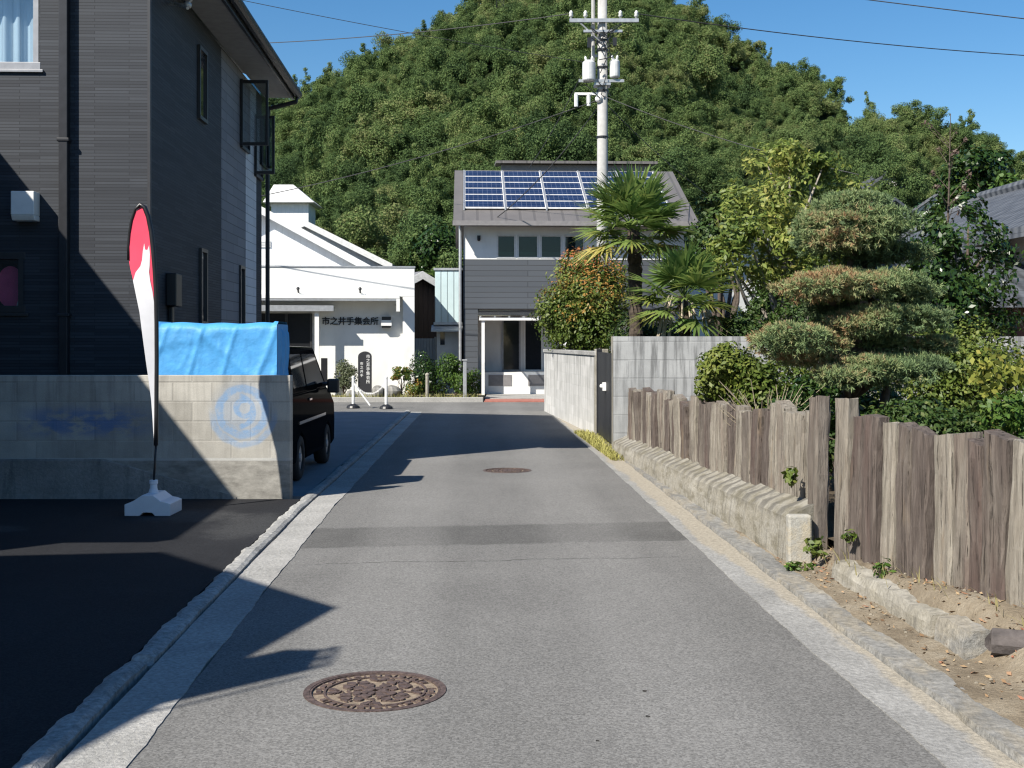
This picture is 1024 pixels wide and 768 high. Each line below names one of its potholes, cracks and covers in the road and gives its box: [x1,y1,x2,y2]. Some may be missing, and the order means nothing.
manhole cover [303,671,446,712]
